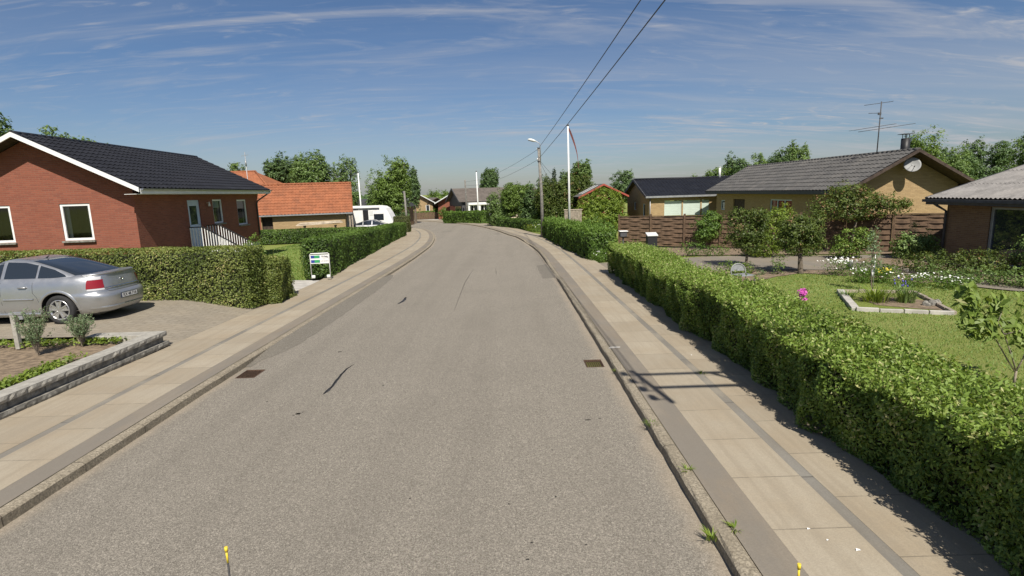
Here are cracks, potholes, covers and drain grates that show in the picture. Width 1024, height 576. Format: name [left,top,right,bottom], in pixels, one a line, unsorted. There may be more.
drain grate [583,359,605,368]
drain grate [236,369,265,378]
